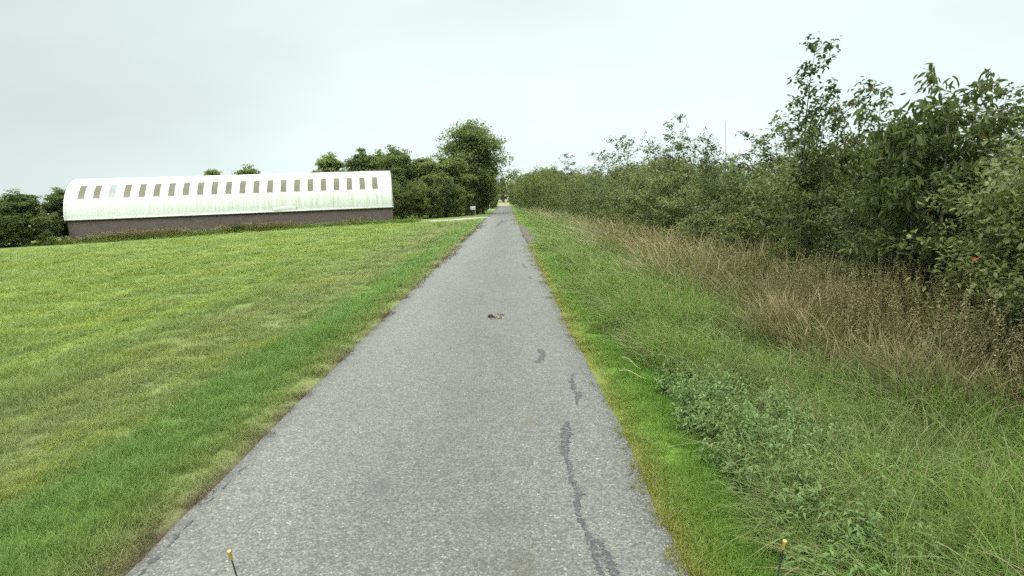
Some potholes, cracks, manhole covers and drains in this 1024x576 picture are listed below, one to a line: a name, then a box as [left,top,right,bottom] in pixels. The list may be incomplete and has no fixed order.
crack [559,374,620,575]
